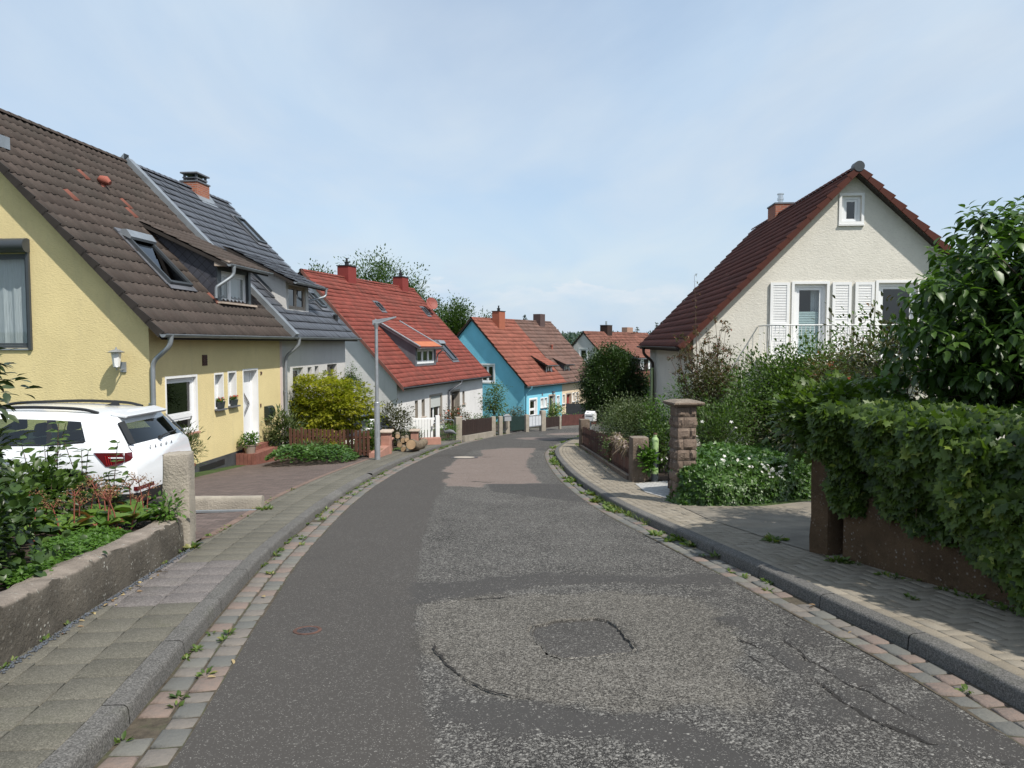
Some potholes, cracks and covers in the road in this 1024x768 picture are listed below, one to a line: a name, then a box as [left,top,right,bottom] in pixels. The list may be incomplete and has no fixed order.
utility cover [293,626,322,635]
pothole [529,618,637,660]
crack [738,624,1007,765]
crack [433,644,531,700]
